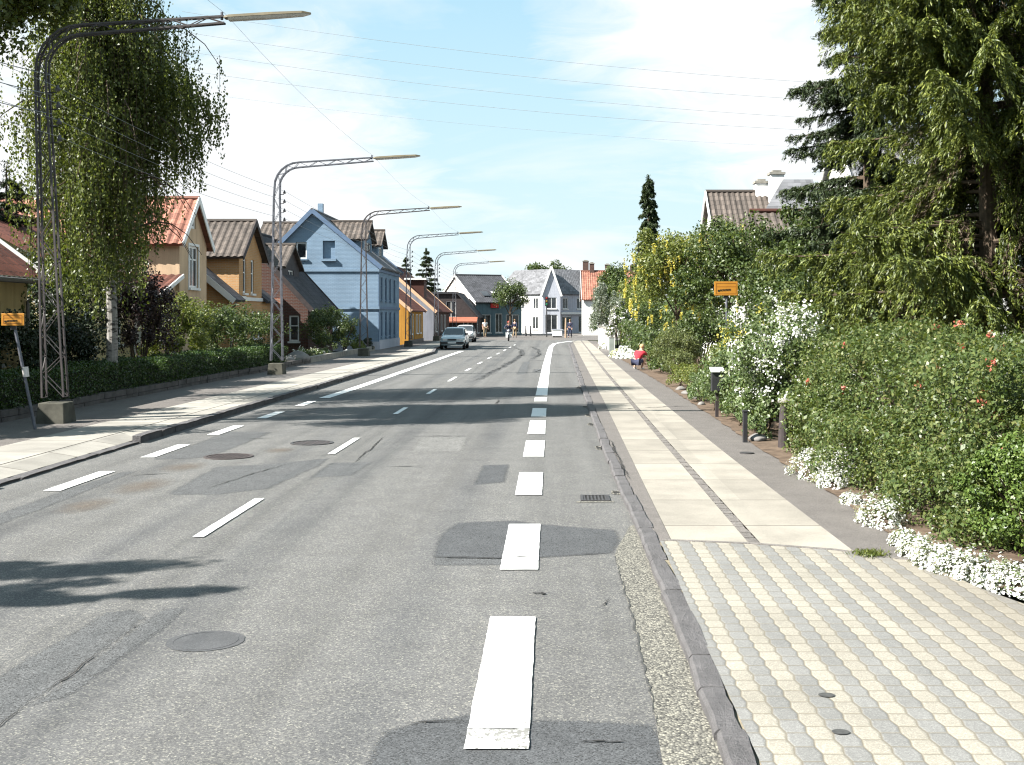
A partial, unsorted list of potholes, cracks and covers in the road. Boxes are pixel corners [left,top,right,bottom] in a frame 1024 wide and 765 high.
manhole cover [165,631,245,652]
